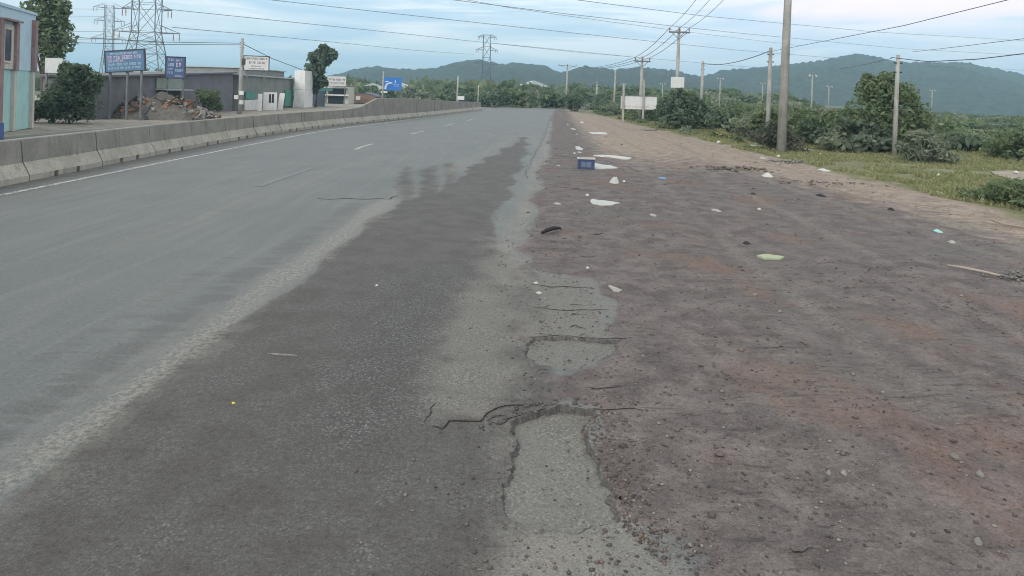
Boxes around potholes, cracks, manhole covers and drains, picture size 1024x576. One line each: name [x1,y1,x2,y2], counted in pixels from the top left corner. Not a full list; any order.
pothole [495,403,627,541]
crack [424,402,545,429]
pothole [520,335,626,372]
crack [534,284,626,339]
crack [523,118,551,178]
